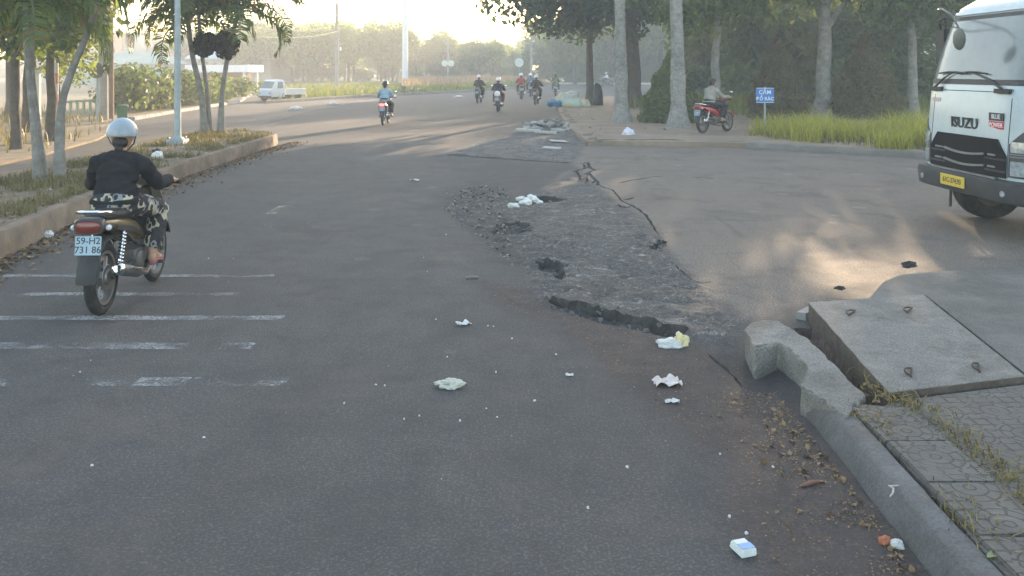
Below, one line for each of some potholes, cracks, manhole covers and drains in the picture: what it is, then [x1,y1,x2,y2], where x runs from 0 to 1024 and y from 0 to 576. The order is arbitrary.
pothole [524,195,567,205]
pothole [647,239,667,250]
crack [439,154,660,236]
pothole [544,295,689,338]
pothole [533,257,569,280]
crack [707,353,744,389]
pothole [492,219,534,235]
